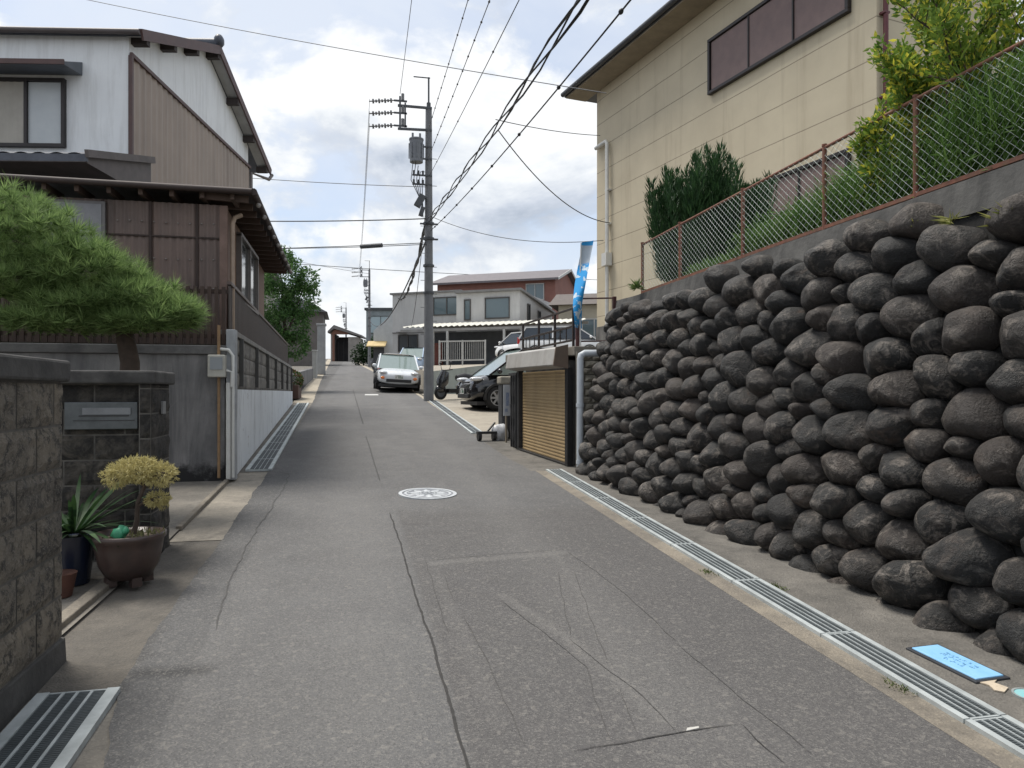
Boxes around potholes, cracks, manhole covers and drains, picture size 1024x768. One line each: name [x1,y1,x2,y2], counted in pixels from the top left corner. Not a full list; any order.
drain grate [254,449,283,459]
manhole cover [398,488,457,500]
drain grate [267,435,291,443]
drain grate [965,715,1024,760]
crack [216,471,290,629]
crack [353,390,380,480]
drain grate [245,458,278,472]
drain grate [732,579,855,637]
drain grate [0,687,121,768]
drain grate [671,543,760,583]
drain grate [261,442,287,450]
